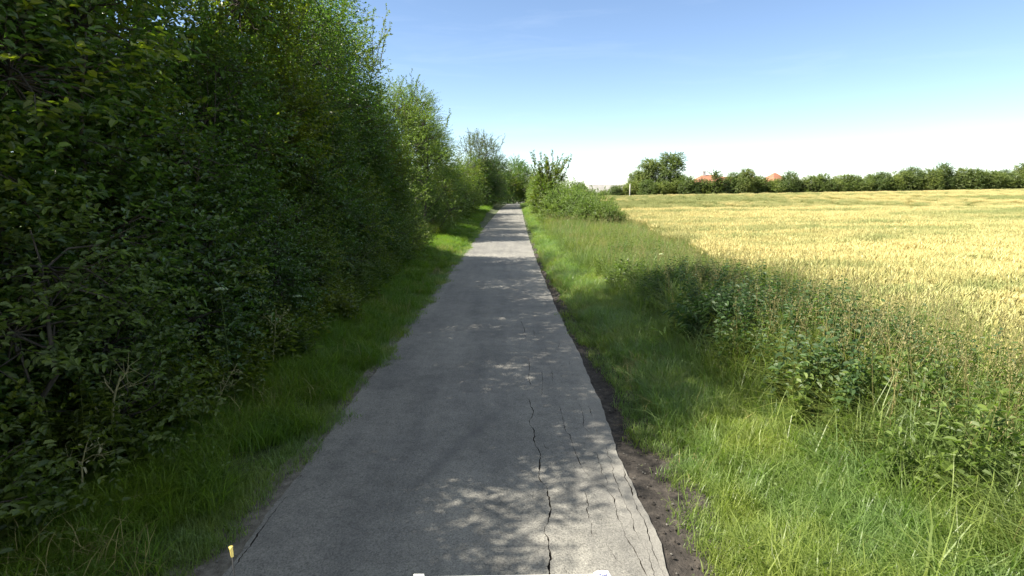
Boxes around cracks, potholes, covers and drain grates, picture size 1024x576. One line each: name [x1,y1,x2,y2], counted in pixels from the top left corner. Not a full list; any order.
crack [528,346,570,575]
crack [560,407,664,576]
